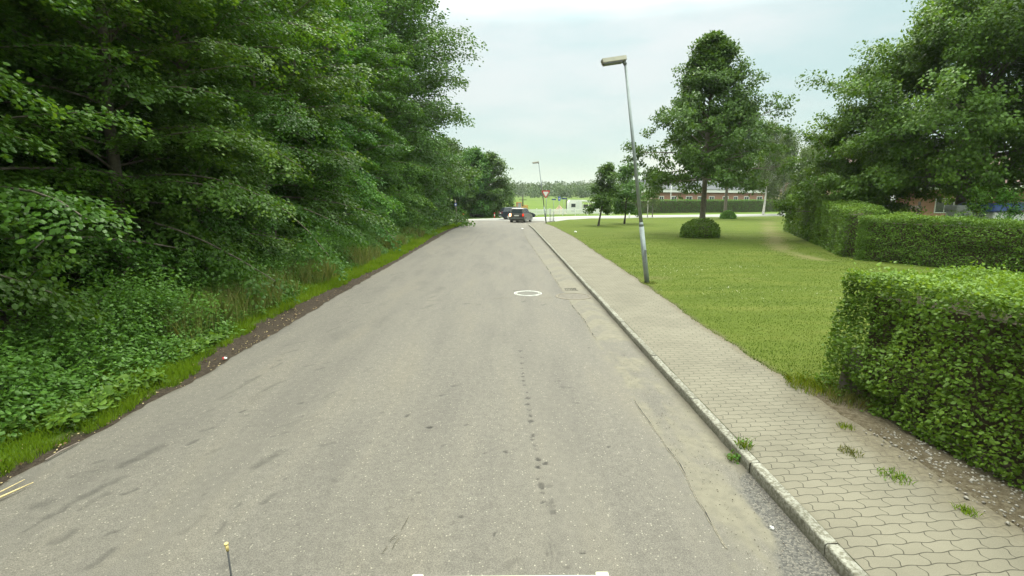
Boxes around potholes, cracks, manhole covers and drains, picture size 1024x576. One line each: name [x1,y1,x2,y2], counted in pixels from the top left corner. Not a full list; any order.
crack [383,516,409,553]
